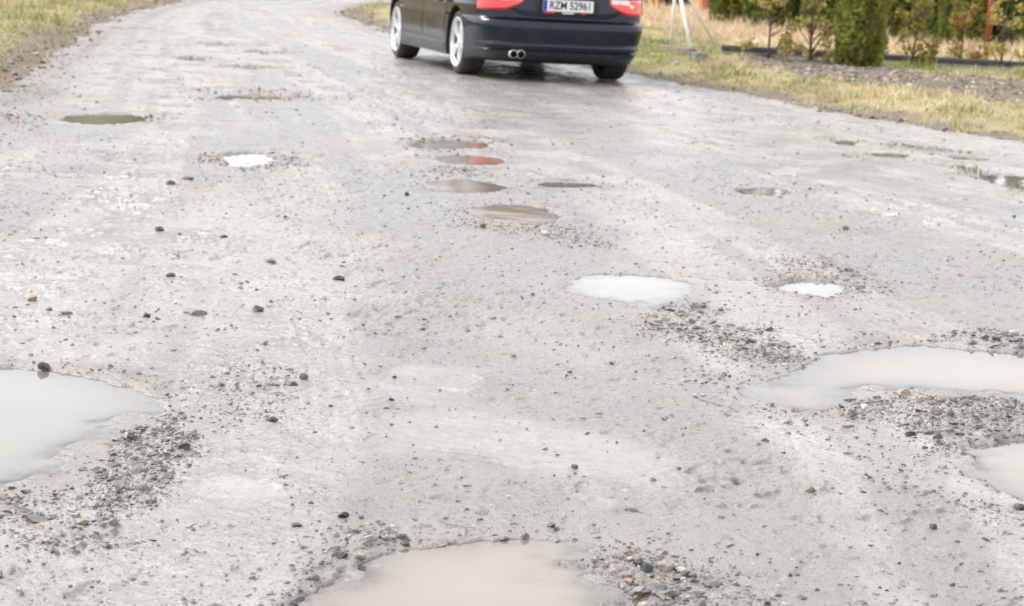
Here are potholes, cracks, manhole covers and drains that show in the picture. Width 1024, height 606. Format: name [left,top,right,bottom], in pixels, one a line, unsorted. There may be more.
pothole [941,431,1024,500]
pothole [408,154,510,165]
pothole [952,172,1024,188]
pothole [400,137,497,149]
pothole [552,272,710,312]
pothole [767,275,855,297]
pothole [721,342,1024,413]
pothole [279,534,686,606]
pothole [731,185,798,196]
pothole [0,363,186,496]
pothole [57,111,150,125]
pothole [218,151,283,167]
